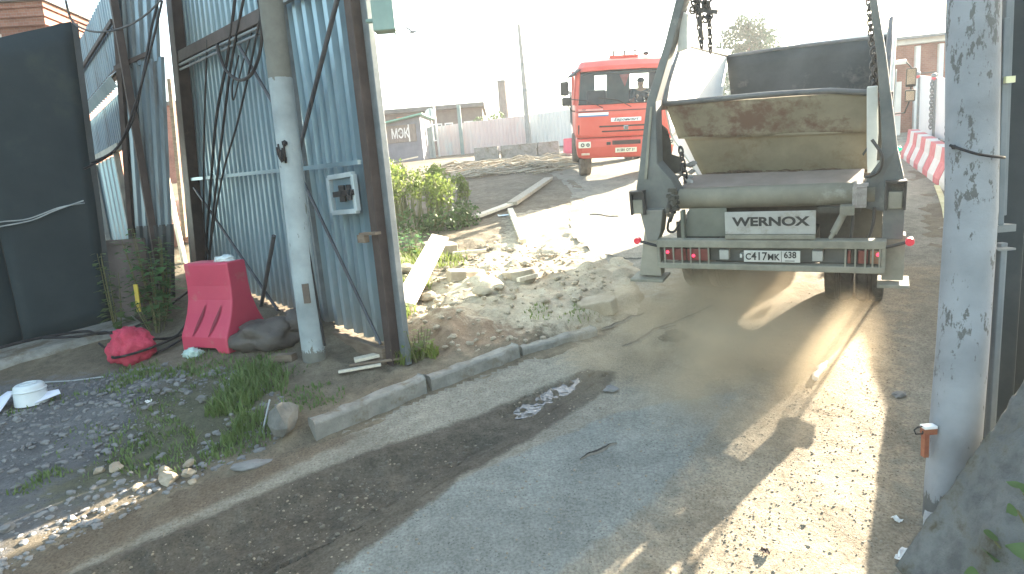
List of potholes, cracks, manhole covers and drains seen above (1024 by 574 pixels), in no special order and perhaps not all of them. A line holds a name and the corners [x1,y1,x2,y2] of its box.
crack [580,442,617,460]
